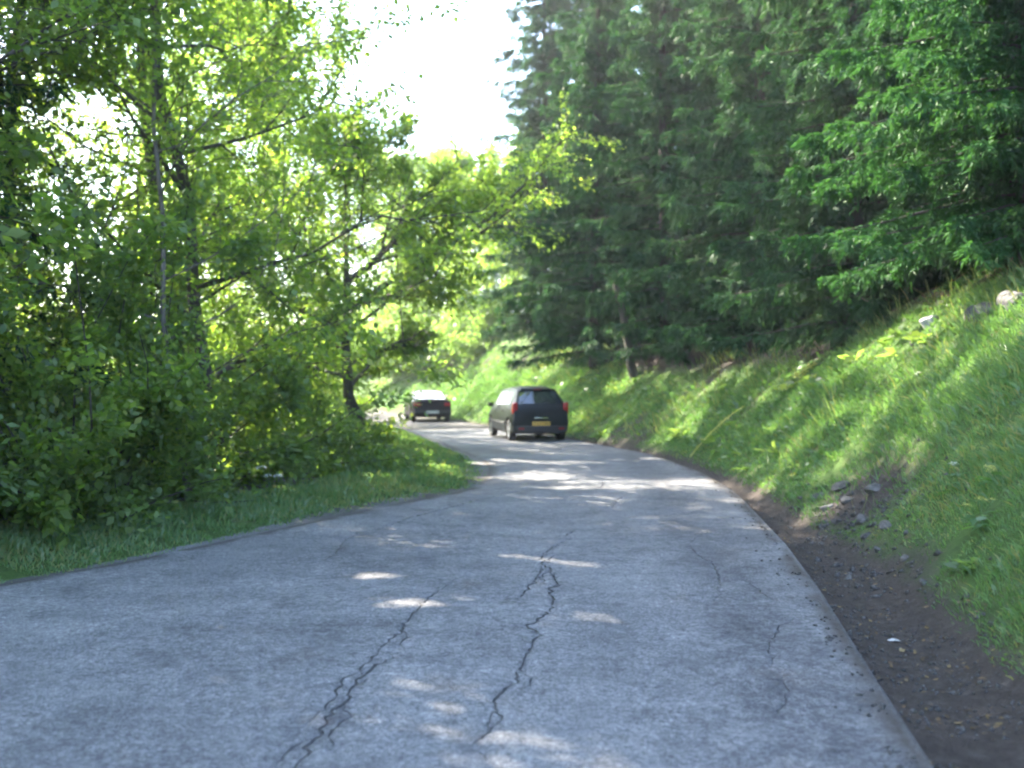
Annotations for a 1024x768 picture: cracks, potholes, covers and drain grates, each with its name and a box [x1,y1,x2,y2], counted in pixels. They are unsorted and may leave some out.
crack [765,620,792,716]
crack [691,536,723,595]
crack [476,545,560,767]
crack [276,581,454,768]
